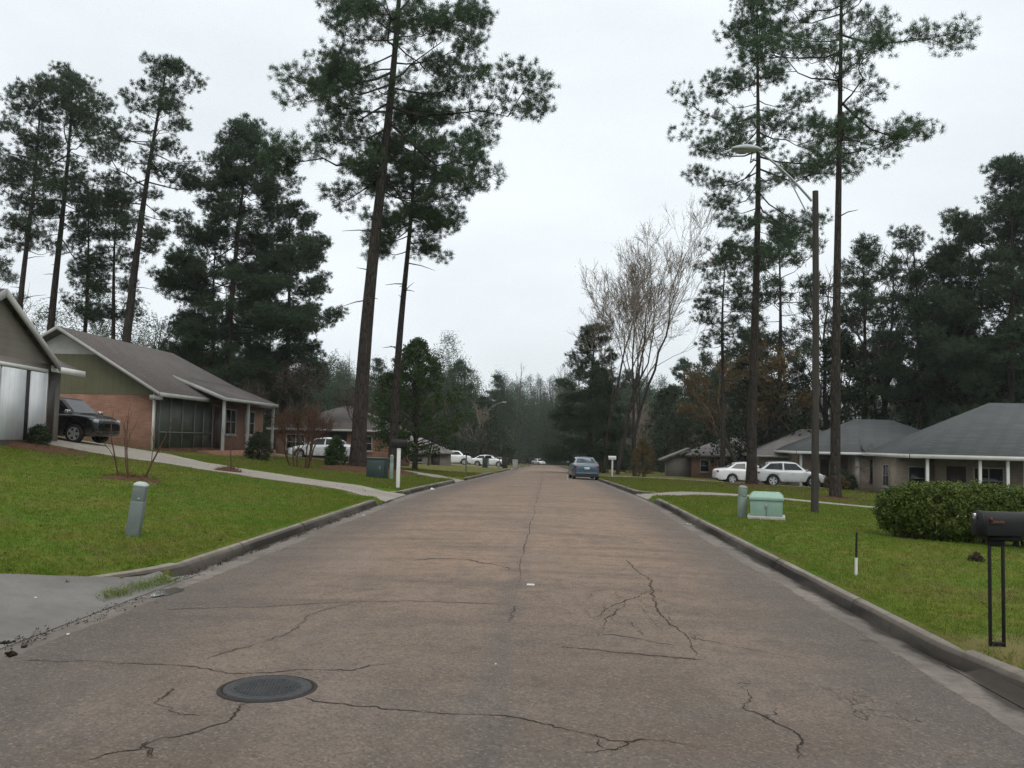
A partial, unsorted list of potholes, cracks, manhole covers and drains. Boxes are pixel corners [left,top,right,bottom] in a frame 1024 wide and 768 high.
crack [568,560,780,660]
crack [738,682,805,759]
crack [27,600,516,674]
crack [823,688,921,722]
crack [305,697,696,753]
manhole cover [216,675,318,703]
crack [87,688,246,761]
